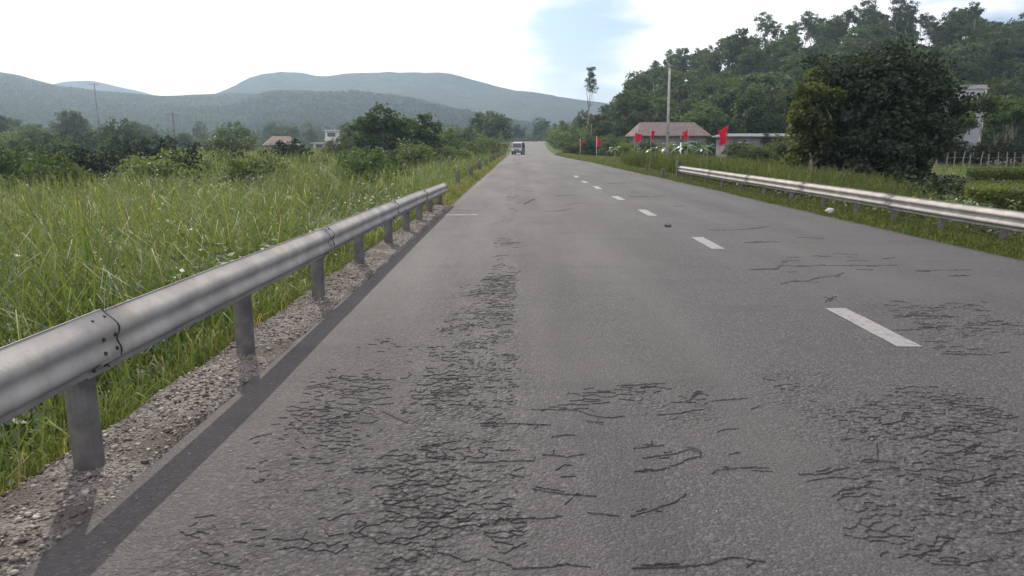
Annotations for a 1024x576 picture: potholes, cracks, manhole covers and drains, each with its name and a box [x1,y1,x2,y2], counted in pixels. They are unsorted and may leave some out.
crack [884,301,1024,356]
crack [916,269,970,277]
crack [180,195,773,569]
crack [723,226,898,303]
